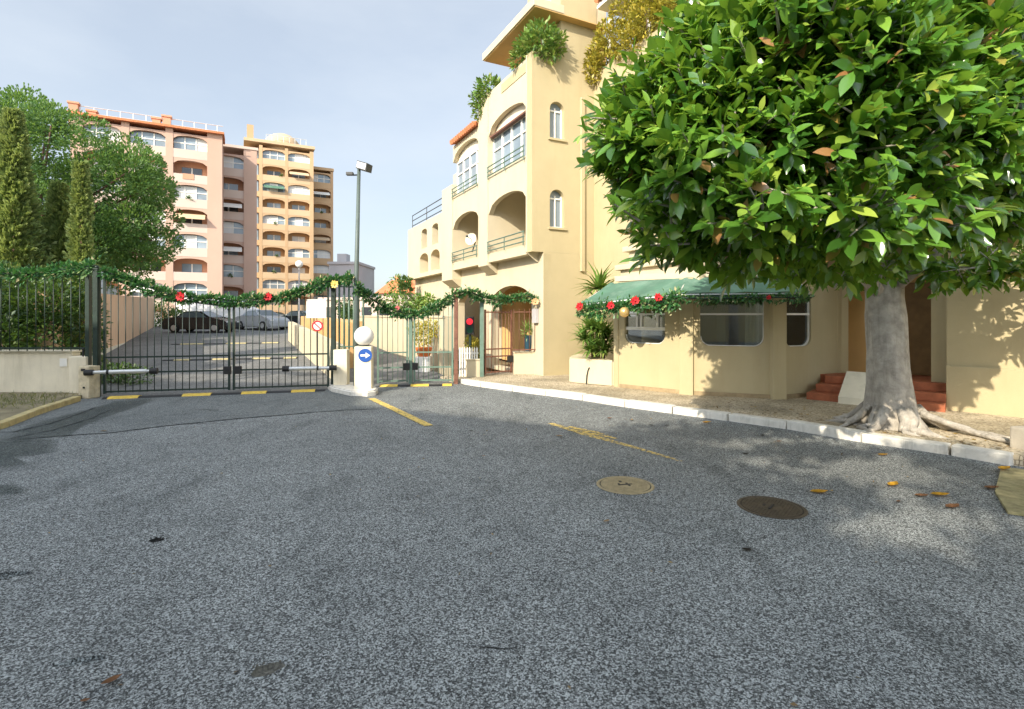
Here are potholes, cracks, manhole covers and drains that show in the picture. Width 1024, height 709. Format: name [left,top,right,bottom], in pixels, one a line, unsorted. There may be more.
manhole cover [596,476,655,495]
manhole cover [737,496,808,519]
